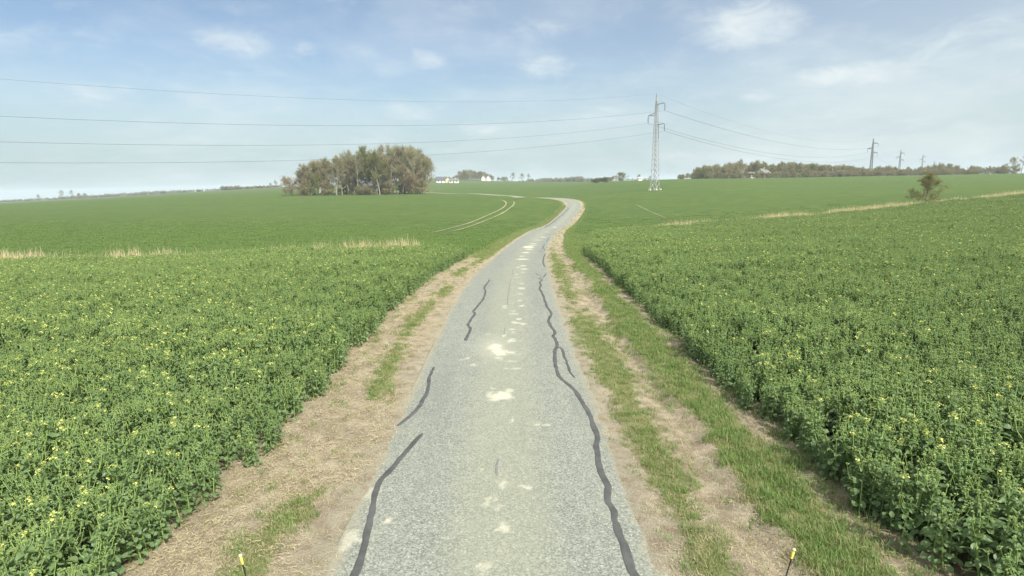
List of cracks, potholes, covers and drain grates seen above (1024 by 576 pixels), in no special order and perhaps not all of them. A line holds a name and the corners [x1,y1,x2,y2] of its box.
crack [495,258,518,475]
